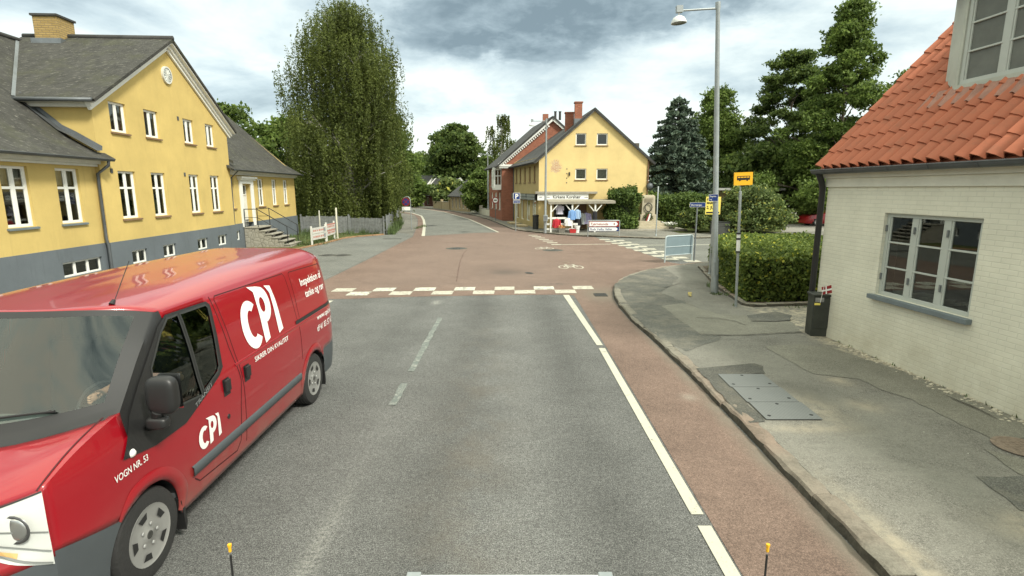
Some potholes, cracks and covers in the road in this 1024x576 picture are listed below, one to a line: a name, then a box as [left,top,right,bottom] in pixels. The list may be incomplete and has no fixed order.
manhole cover [990,436,1024,456]
manhole cover [718,374,822,419]
